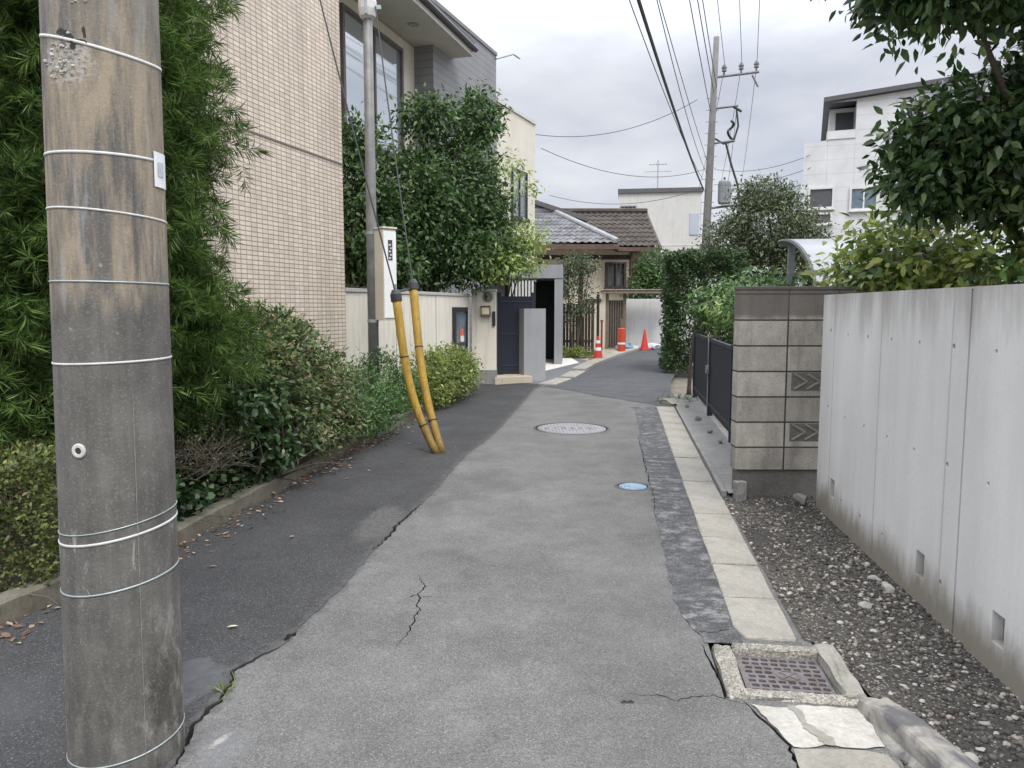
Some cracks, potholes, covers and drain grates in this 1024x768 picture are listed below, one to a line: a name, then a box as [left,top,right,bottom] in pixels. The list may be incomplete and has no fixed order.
manhole cover [614,482,652,491]
crack [396,576,428,646]
manhole cover [533,422,610,435]
drain grate [711,642,867,721]
crack [631,631,799,768]
